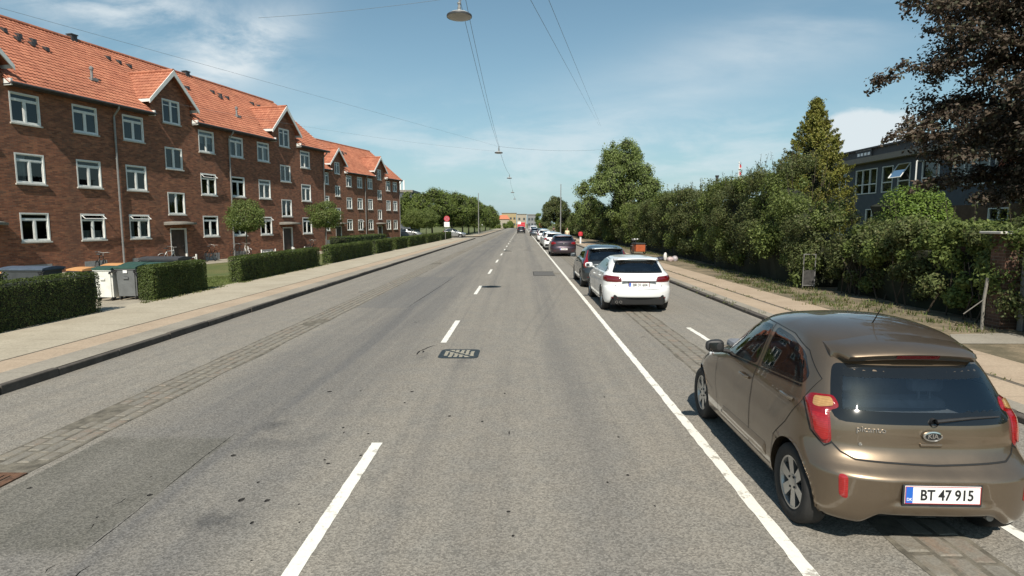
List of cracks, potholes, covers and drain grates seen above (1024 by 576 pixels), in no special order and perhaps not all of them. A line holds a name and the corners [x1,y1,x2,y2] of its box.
crack [88,435,233,549]
drain grate [0,472,28,488]
